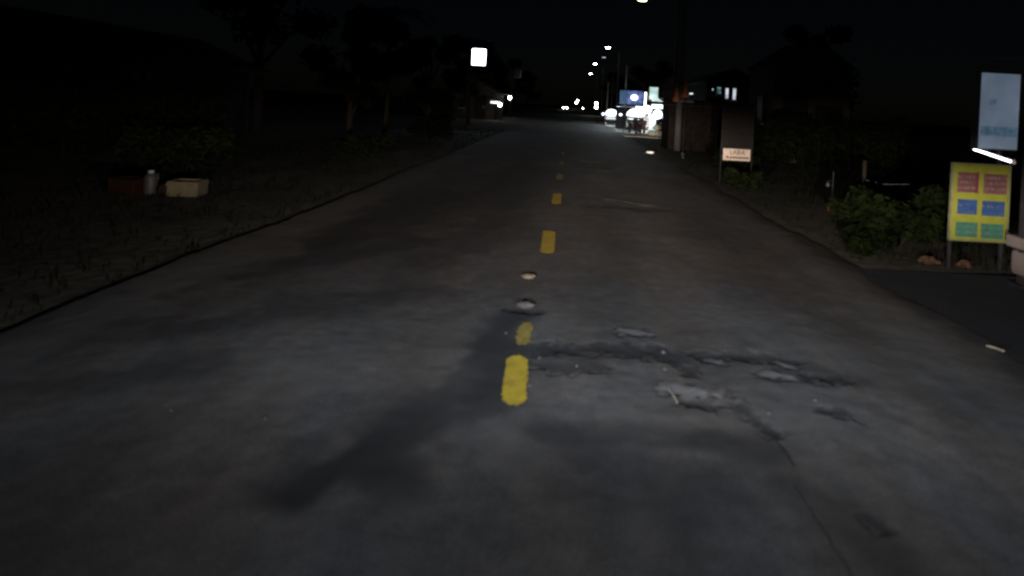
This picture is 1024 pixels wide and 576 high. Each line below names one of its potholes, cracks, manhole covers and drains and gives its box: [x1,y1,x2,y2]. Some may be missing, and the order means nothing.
pothole [673,398,717,411]
pothole [528,355,613,378]
crack [793,485,851,576]
pothole [676,364,703,378]
pothole [814,406,853,420]
pothole [796,370,855,387]
crack [775,441,796,467]
pothole [532,338,697,368]
pothole [684,348,805,365]
pothole [857,508,897,536]
